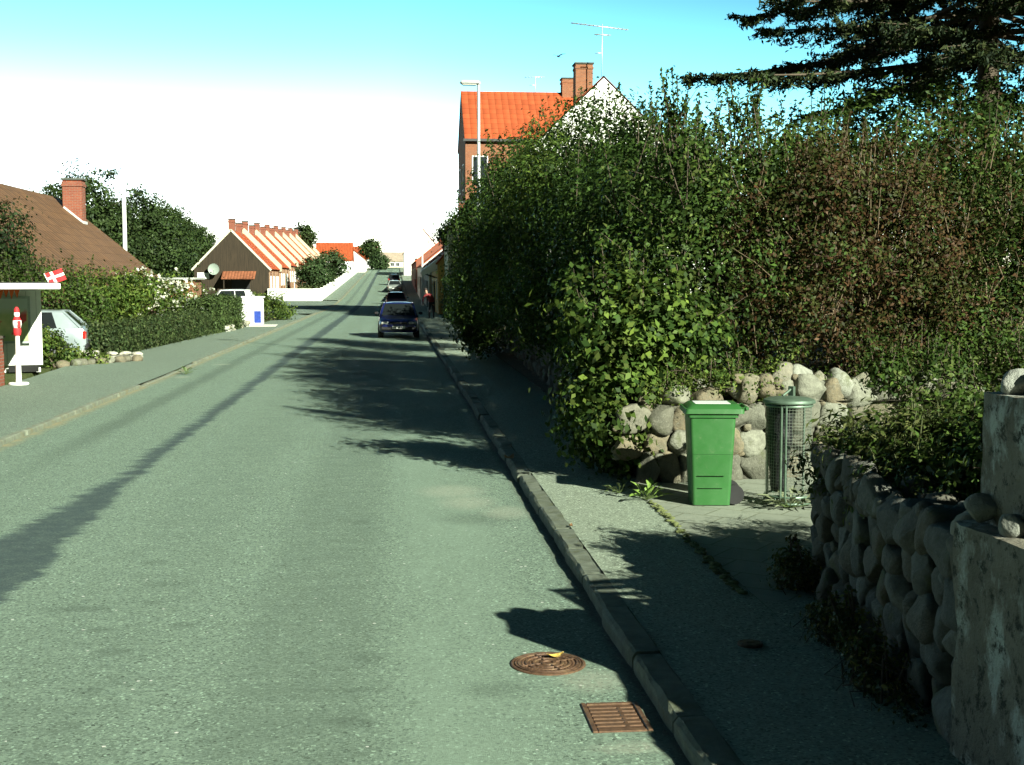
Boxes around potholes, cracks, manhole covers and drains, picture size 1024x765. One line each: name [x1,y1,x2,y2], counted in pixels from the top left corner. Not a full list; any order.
manhole cover [510,652,586,676]
drain grate [580,701,653,733]
